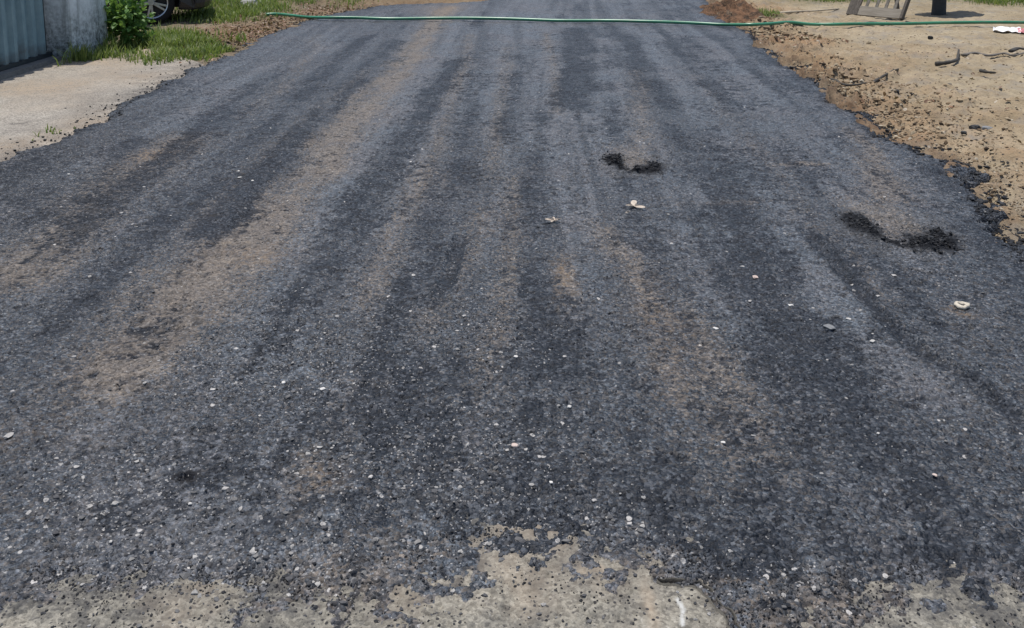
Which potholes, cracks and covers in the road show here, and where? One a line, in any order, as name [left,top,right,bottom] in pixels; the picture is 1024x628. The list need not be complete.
pothole [171,470,198,484]
